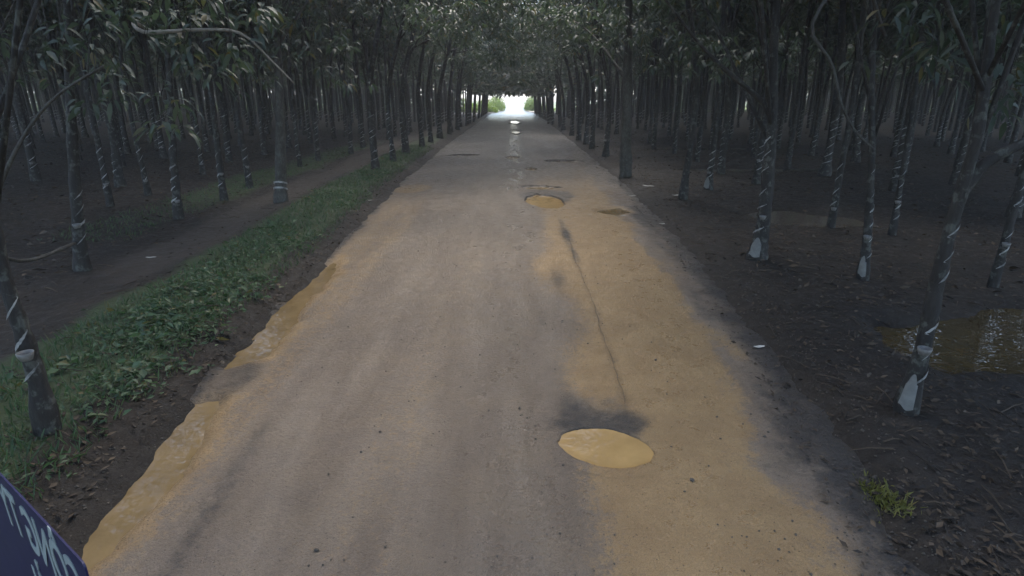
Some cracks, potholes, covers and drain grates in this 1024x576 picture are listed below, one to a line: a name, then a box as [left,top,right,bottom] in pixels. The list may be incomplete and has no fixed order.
crack [557,215,627,407]
pothole [543,420,670,478]
pothole [516,192,573,210]
